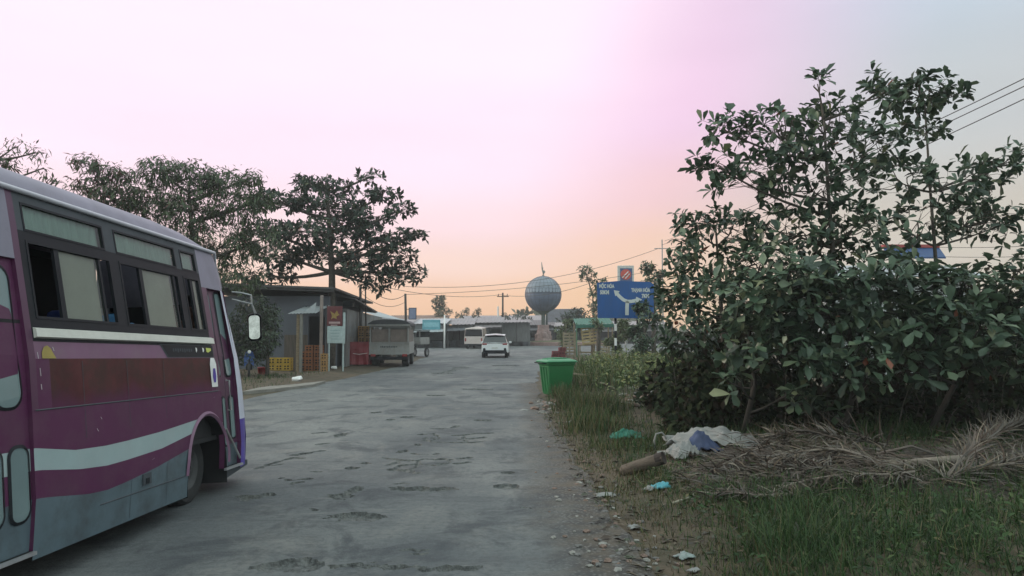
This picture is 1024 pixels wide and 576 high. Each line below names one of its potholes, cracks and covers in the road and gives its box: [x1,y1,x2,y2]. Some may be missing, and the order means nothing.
pothole [234,492,277,501]
pothole [327,486,364,500]
pothole [323,512,388,522]
pothole [247,557,483,574]
